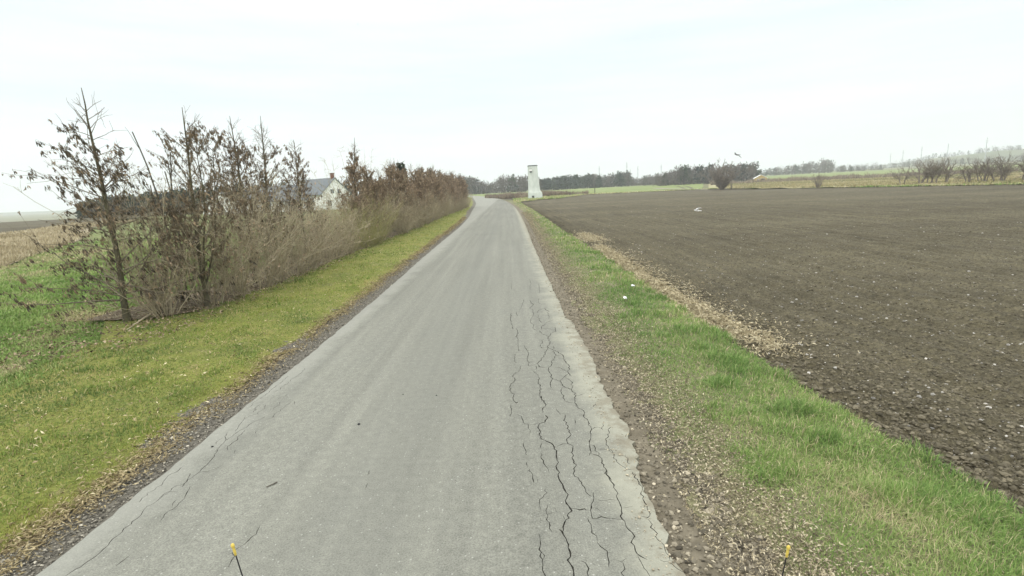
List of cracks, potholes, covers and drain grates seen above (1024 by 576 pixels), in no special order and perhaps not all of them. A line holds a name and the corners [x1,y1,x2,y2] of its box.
crack [509,285,681,576]
